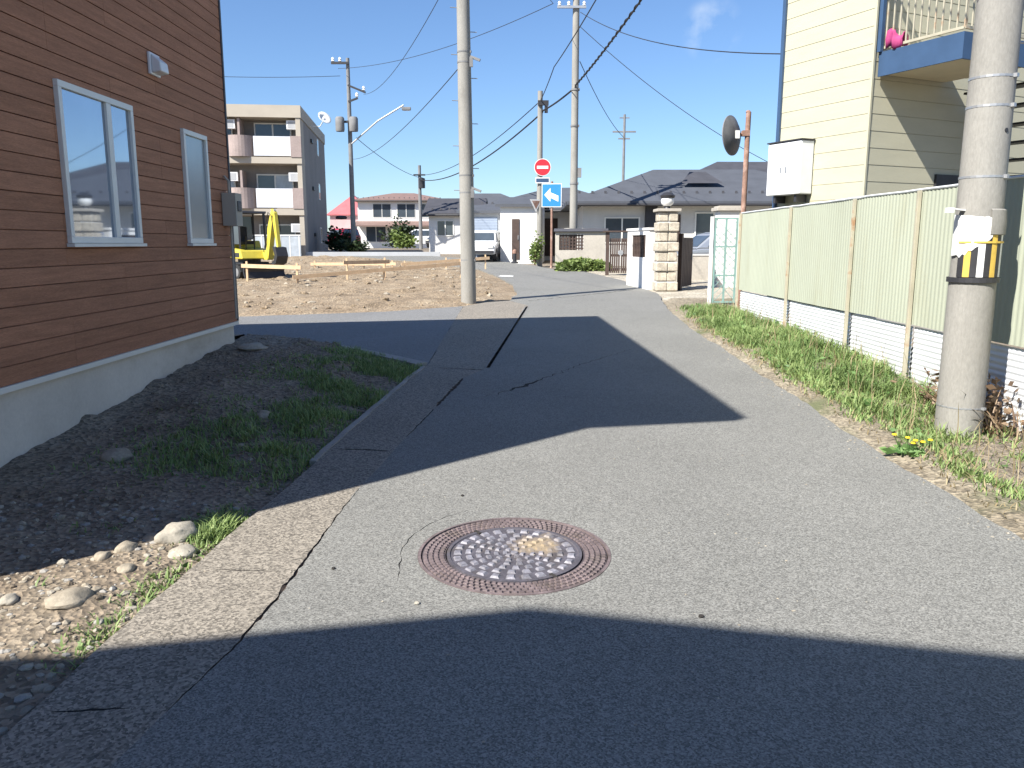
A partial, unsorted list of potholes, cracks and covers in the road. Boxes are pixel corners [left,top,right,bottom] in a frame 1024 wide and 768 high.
manhole cover [418,517,611,596]
